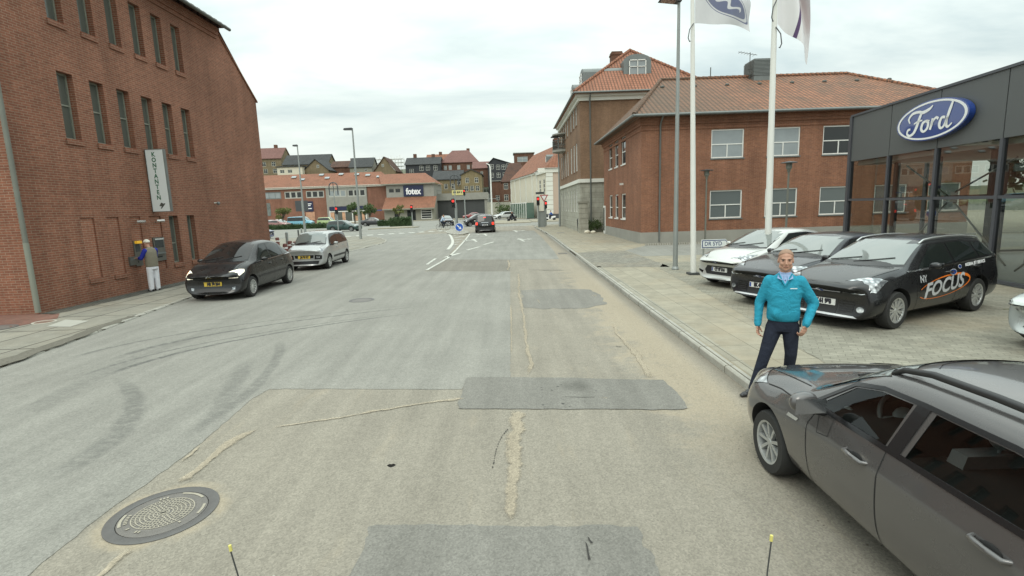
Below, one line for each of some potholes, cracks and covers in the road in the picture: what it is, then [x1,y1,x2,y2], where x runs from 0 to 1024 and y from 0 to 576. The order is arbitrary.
crack [180,431,253,480]
crack [613,324,651,377]
manhole cover [101,487,220,545]
crack [281,398,462,426]
crack [507,260,540,369]
